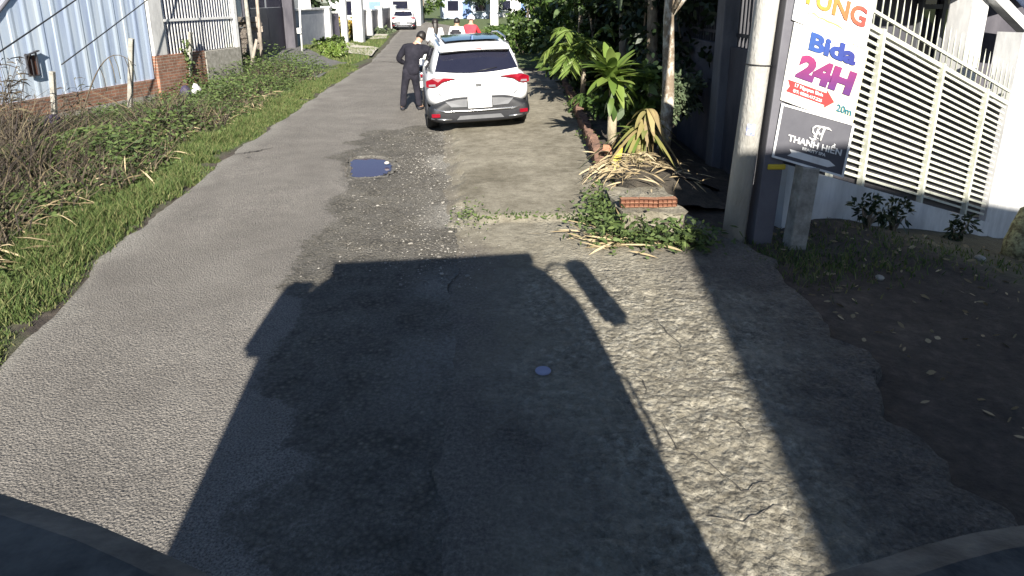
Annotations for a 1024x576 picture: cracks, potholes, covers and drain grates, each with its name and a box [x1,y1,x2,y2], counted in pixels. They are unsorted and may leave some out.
pothole [346,155,400,179]
crack [632,319,783,523]
